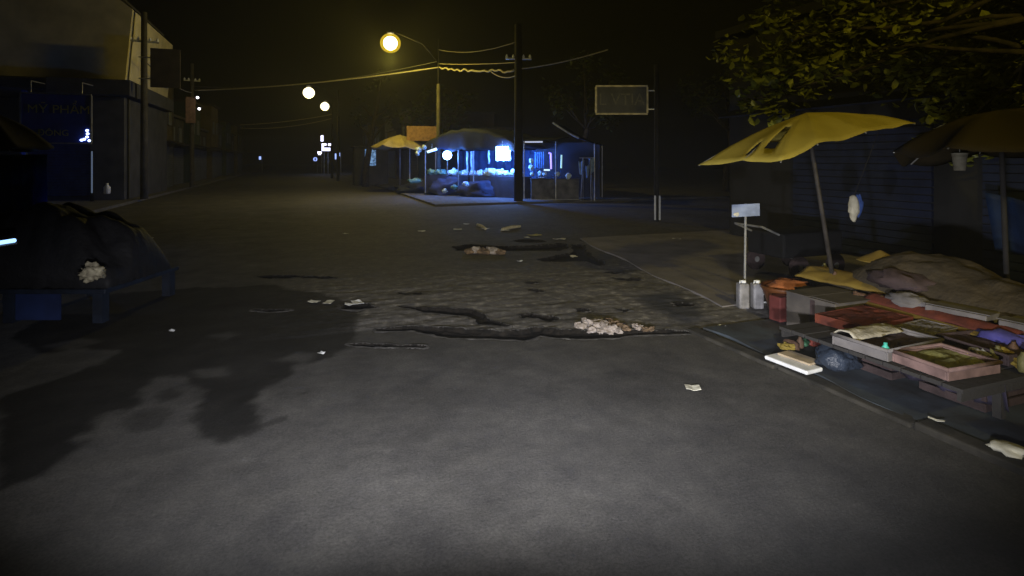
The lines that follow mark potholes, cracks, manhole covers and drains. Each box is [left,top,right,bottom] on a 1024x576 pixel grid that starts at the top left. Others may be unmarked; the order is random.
pothole [536,244,609,266]
crack [345,281,694,349]
pothole [450,243,572,251]
